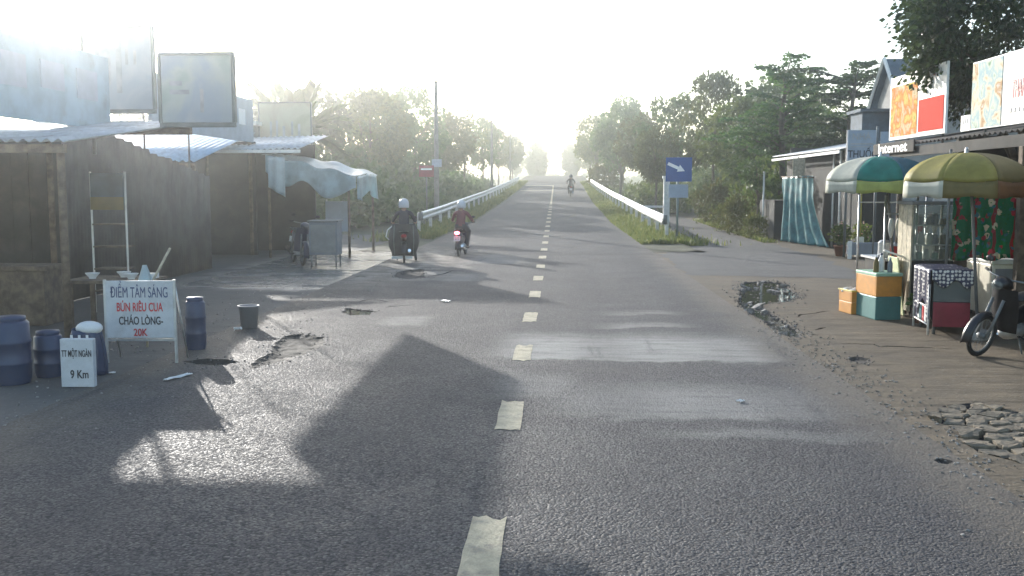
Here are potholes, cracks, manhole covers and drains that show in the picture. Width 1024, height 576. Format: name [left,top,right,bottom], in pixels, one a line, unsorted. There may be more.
pothole [239,333,335,369]
pothole [844,355,875,366]
pothole [729,280,812,339]
pothole [172,356,246,369]
pothole [340,307,380,316]
